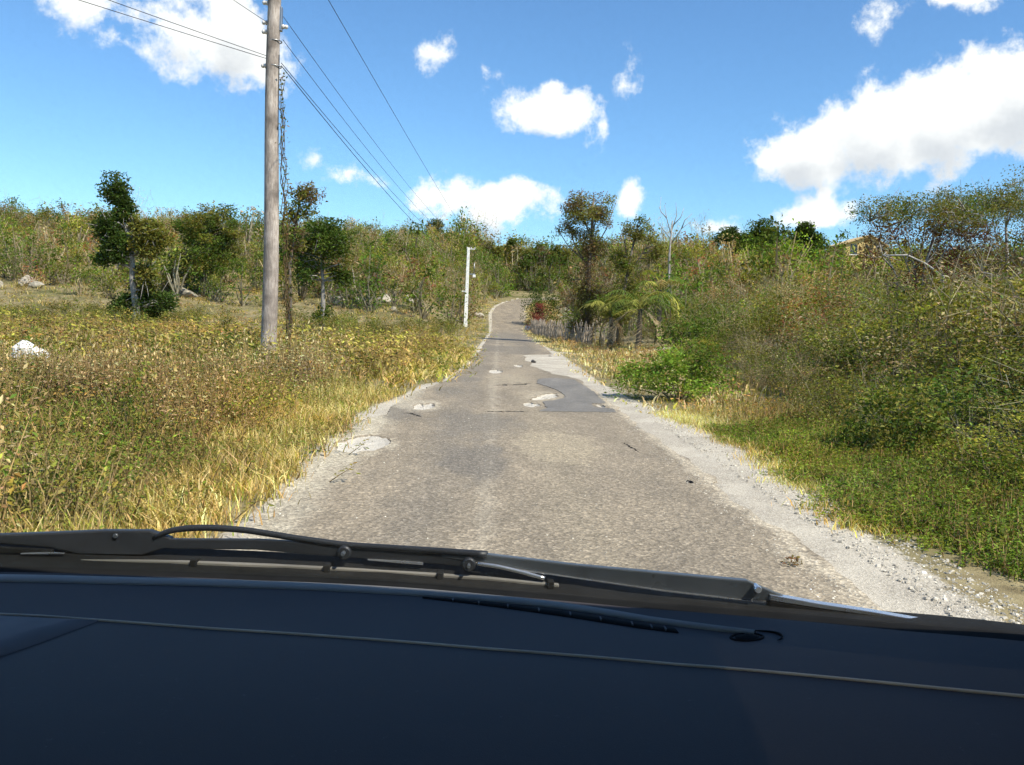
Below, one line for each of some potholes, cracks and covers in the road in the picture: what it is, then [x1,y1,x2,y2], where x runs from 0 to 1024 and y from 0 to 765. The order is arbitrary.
pothole [333,434,391,453]
